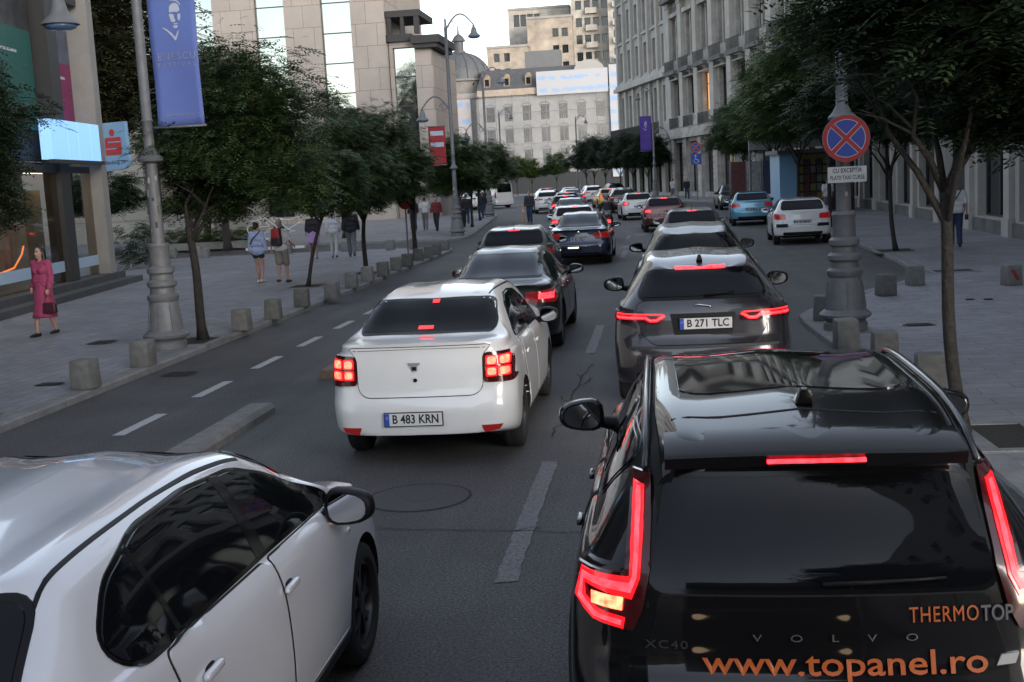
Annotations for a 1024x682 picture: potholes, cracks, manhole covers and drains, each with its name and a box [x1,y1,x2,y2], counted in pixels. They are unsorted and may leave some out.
manhole cover [372,484,472,512]
crack [552,364,593,437]
